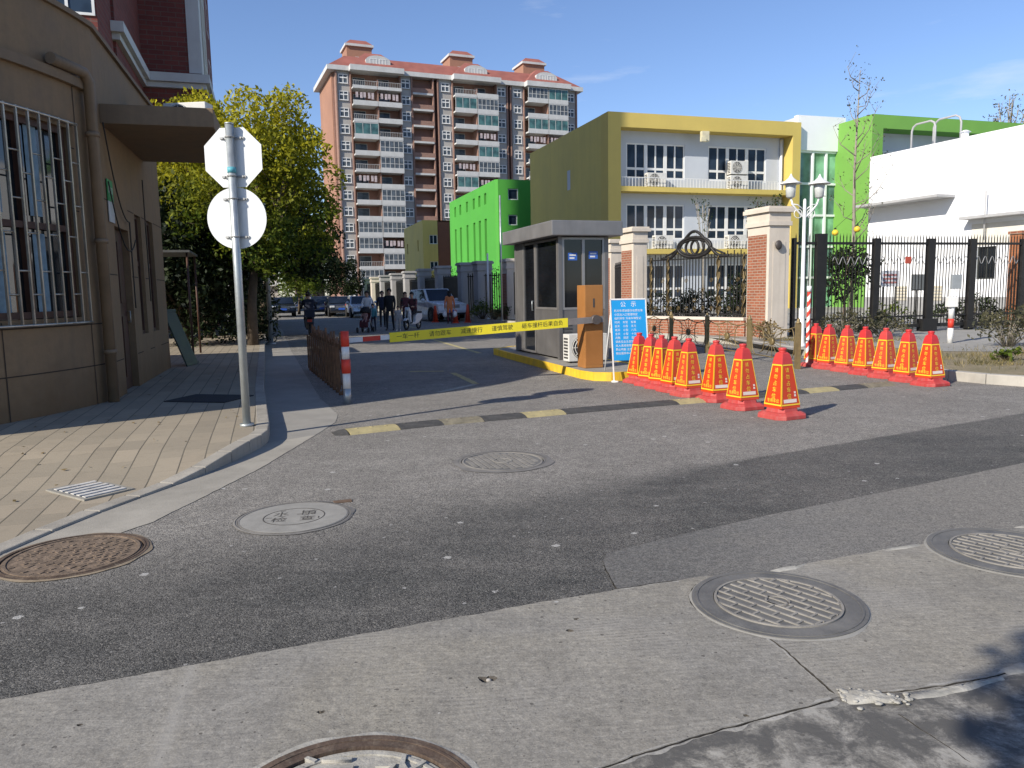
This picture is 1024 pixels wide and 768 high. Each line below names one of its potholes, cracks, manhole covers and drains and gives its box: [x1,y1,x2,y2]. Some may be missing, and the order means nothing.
manhole cover [0,532,153,582]
manhole cover [253,732,480,768]
manhole cover [689,571,872,641]
manhole cover [233,501,355,535]
manhole cover [452,450,554,473]
manhole cover [924,528,1024,578]
drain grate [46,480,135,501]
